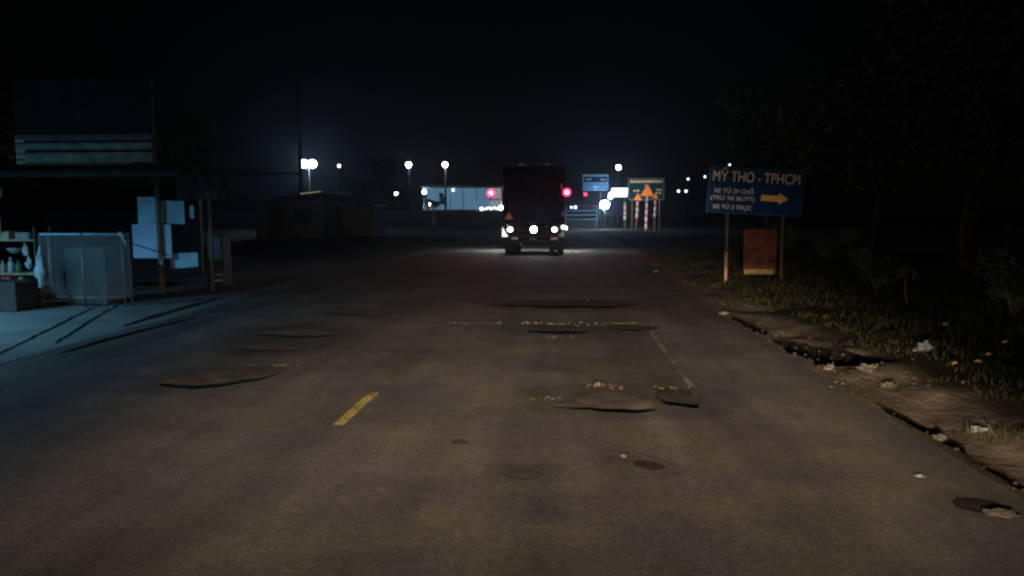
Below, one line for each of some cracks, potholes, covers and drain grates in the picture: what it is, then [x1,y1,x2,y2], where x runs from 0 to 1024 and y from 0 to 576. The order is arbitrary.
pothole [157,365,287,390]
pothole [527,324,589,334]
pothole [255,327,343,338]
pothole [633,460,666,470]
pothole [952,497,1006,513]
pothole [551,389,658,414]
pothole [654,388,703,408]
pothole [231,343,307,351]
